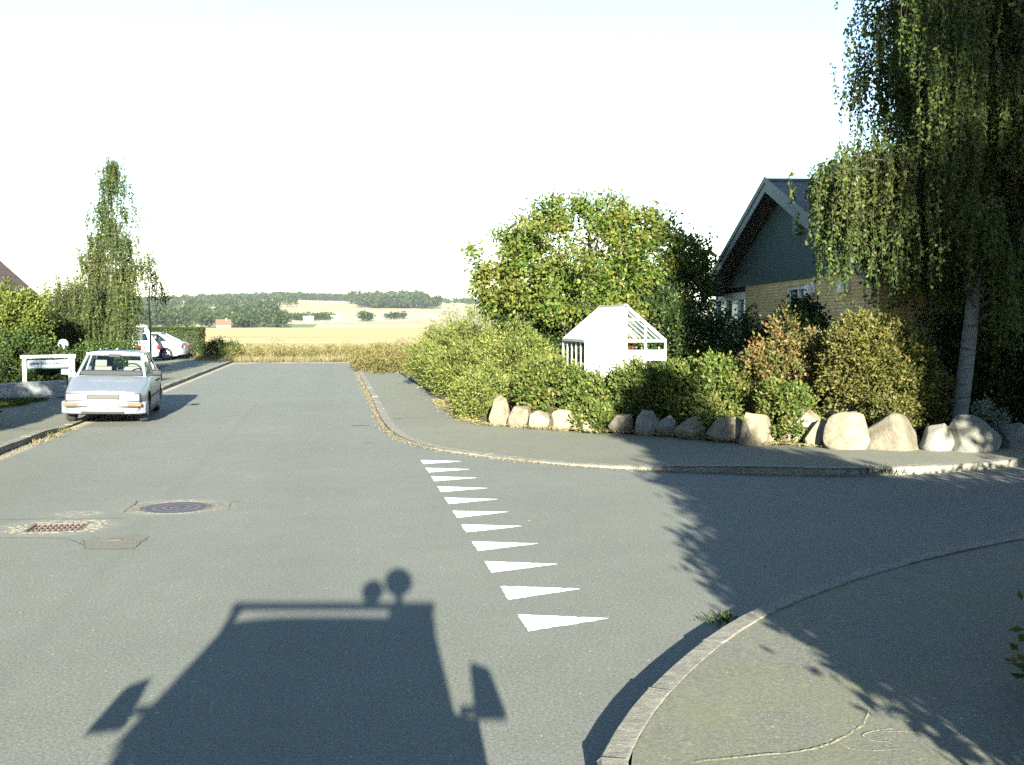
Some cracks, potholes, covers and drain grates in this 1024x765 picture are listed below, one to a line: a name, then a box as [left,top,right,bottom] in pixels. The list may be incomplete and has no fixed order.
manhole cover [122,500,229,514]
drain grate [4,519,107,533]
